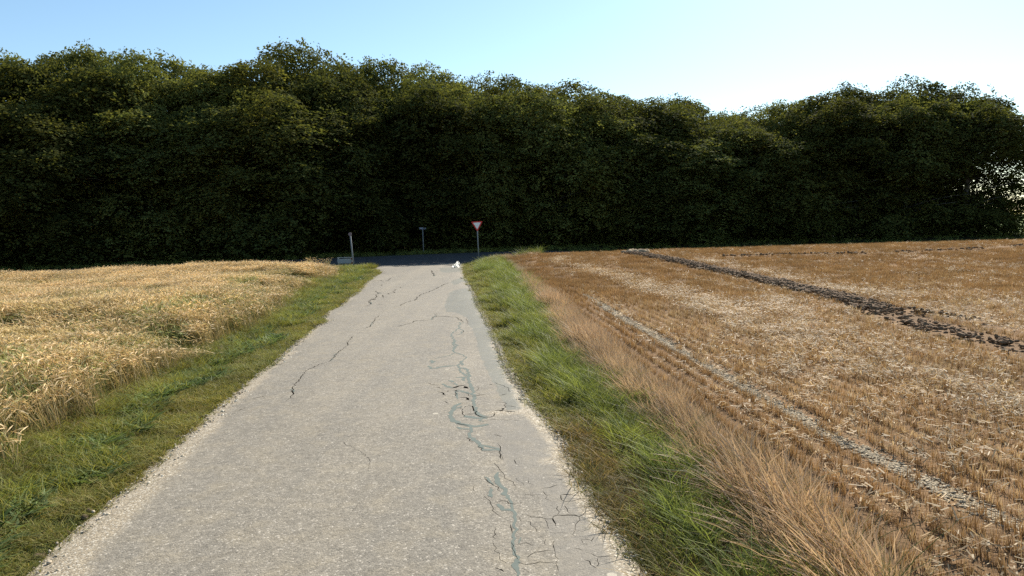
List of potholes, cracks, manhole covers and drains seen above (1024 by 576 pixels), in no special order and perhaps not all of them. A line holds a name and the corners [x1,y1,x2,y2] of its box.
crack [286,270,621,576]
